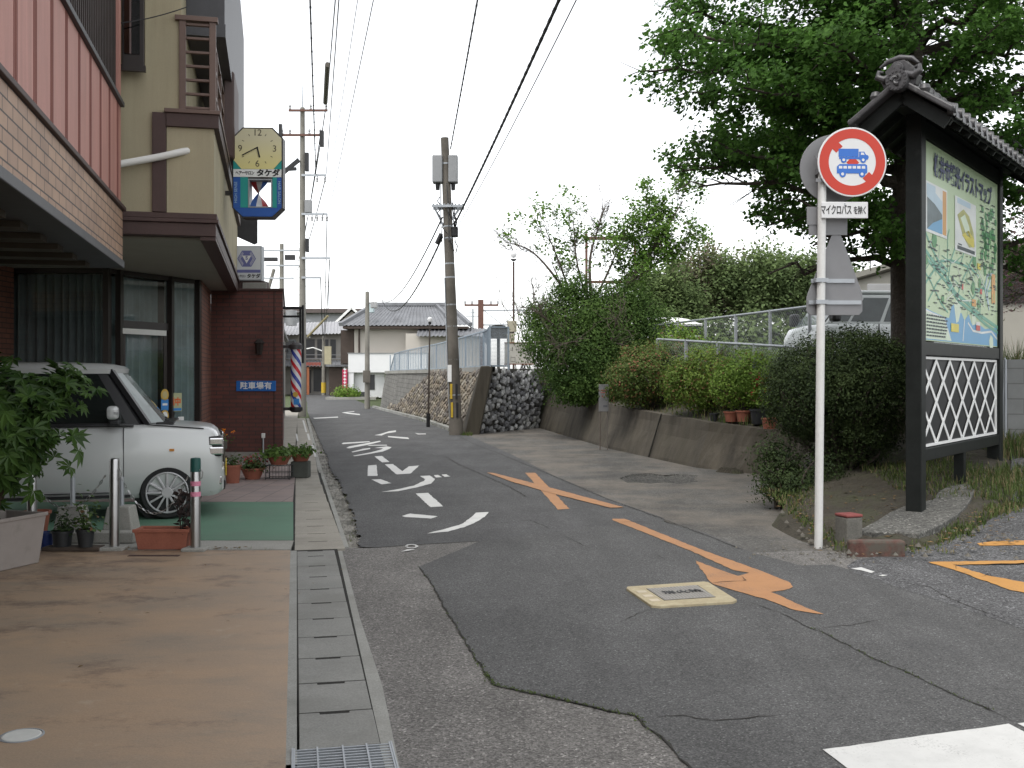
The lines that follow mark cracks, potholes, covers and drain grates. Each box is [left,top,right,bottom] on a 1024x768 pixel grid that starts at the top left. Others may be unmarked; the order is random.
drain grate [291,741,399,768]
manhole cover [0,728,45,743]
manhole cover [626,581,737,608]
crack [740,601,1012,721]
